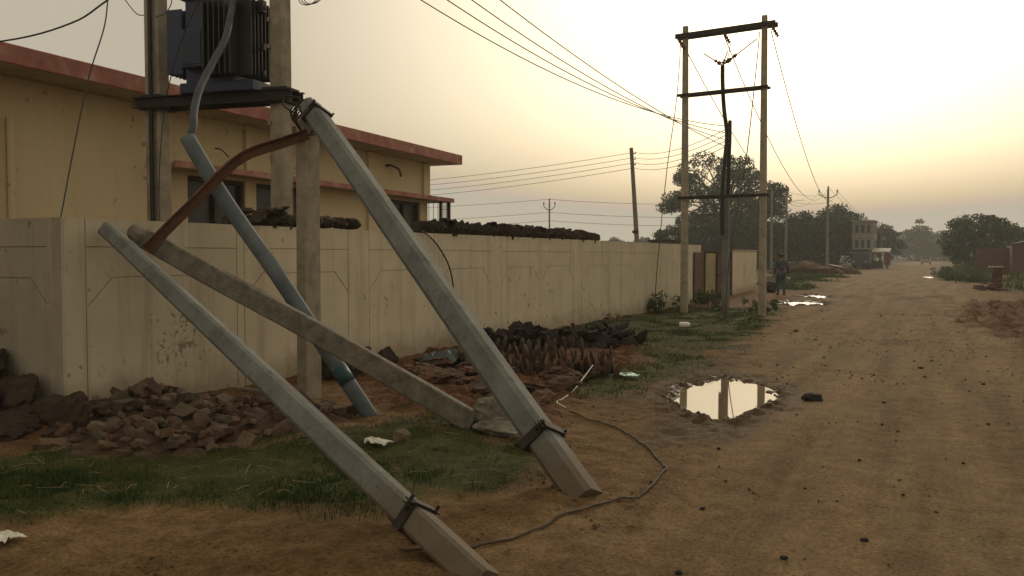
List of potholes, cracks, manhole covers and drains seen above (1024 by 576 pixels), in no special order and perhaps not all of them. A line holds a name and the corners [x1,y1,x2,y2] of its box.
pothole [654,374,790,425]
pothole [766,299,834,307]
